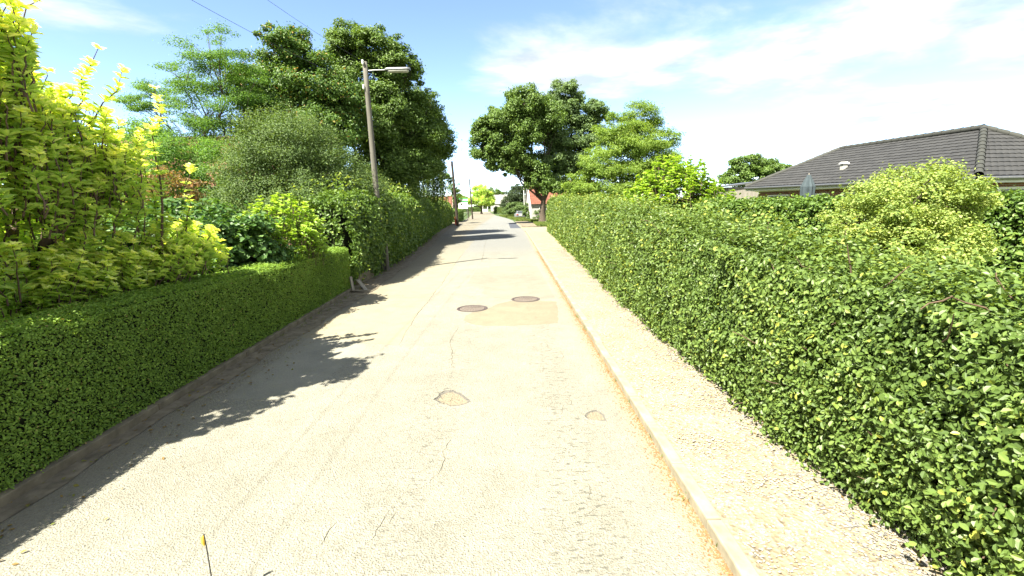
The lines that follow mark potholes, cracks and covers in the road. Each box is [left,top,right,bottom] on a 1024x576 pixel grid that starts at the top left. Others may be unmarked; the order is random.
pothole [433,390,471,406]
pothole [585,410,606,421]
